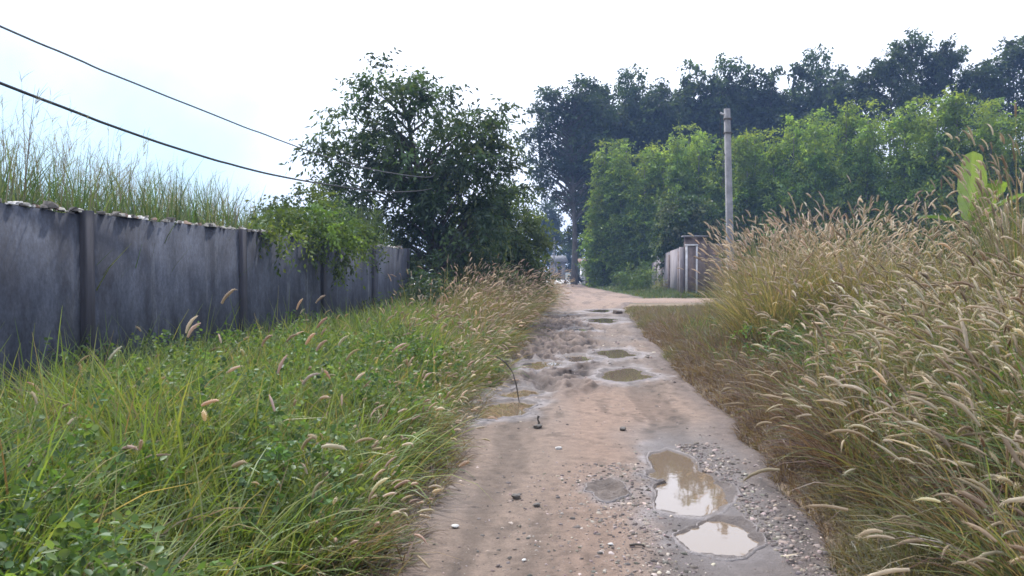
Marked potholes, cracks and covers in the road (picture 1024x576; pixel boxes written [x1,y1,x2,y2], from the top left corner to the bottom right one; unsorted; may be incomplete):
pothole [594,367,660,383]
pothole [671,514,768,562]
pothole [586,348,643,359]
pothole [490,387,546,399]
pothole [458,398,540,421]
pothole [643,447,741,520]
pothole [519,359,569,371]
pothole [583,478,632,504]
